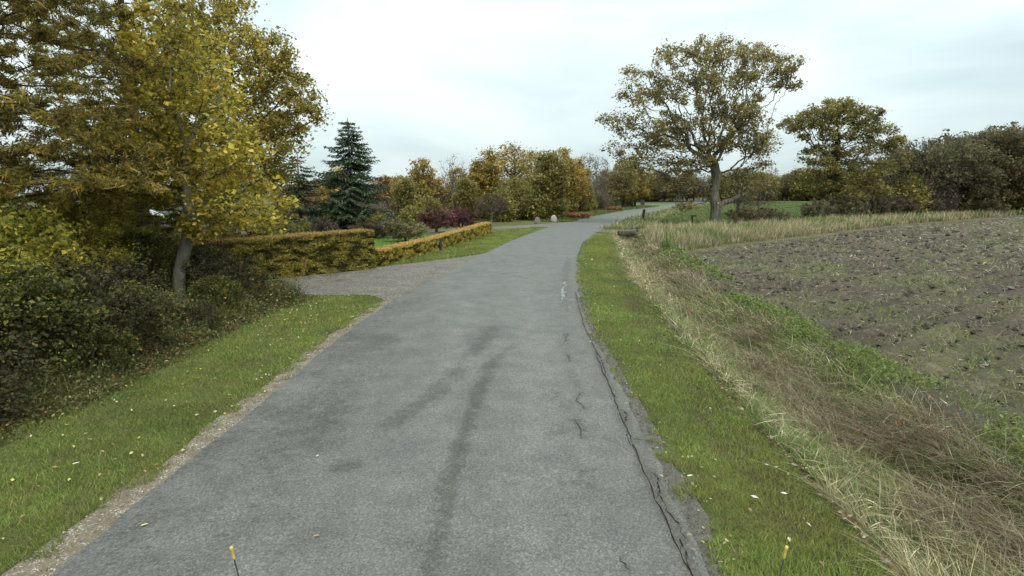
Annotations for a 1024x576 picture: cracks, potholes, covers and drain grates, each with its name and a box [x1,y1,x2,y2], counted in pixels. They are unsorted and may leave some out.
crack [561,281,693,576]
